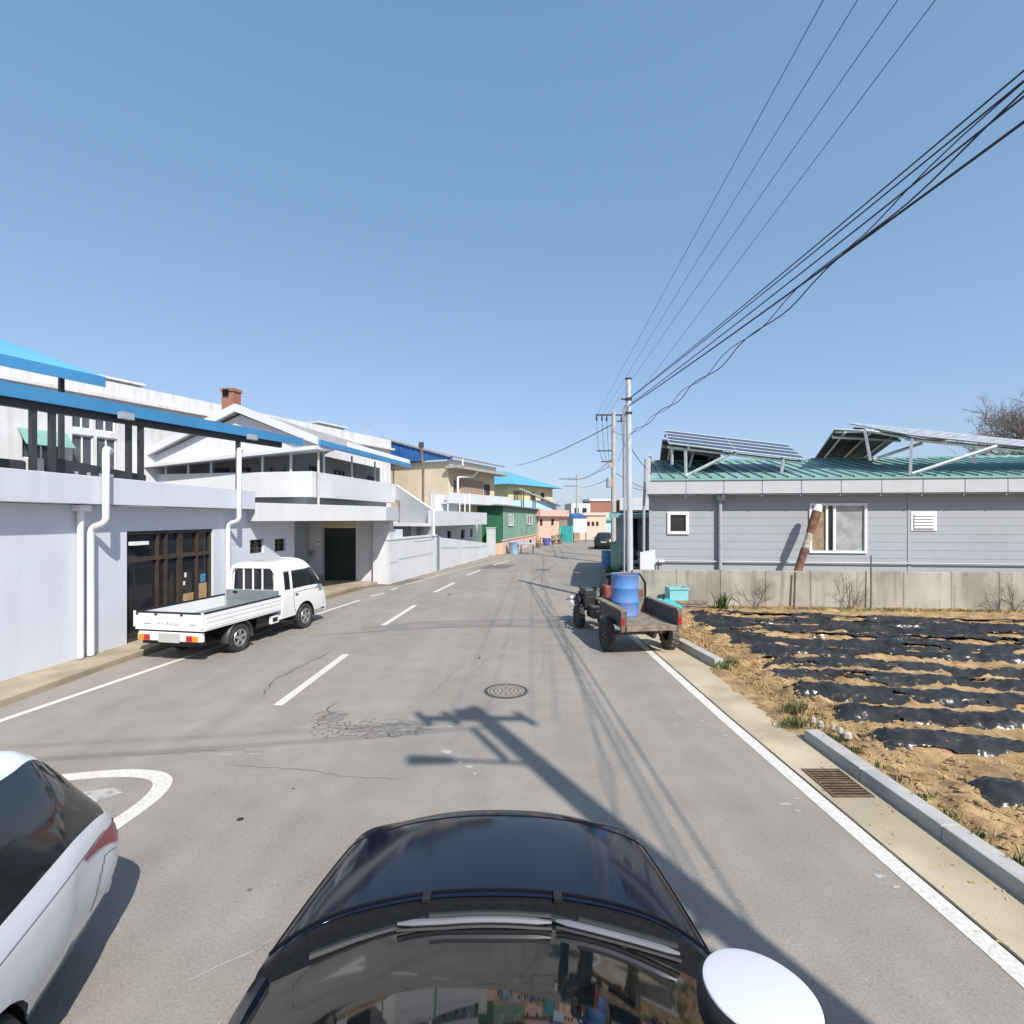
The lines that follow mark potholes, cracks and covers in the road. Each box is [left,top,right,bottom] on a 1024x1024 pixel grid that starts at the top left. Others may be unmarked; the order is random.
crack [263,619,577,696]
drain grate [801,768,875,798]
manhole cover [484,684,528,699]
crack [135,749,393,779]
crack [310,701,424,739]
